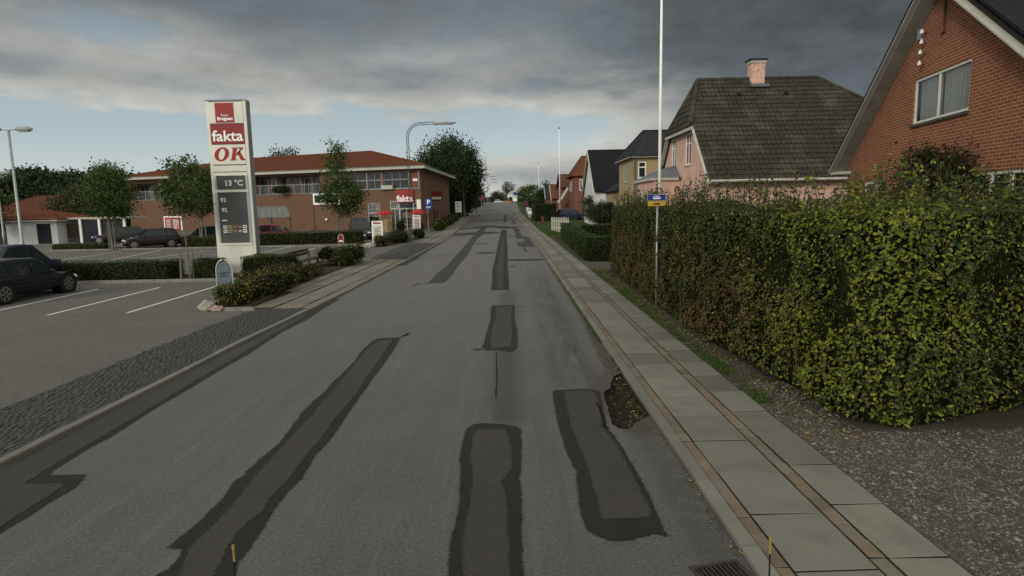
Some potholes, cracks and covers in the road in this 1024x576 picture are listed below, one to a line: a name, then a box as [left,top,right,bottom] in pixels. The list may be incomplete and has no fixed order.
pothole [604,374,649,429]
drain grate [688,559,753,576]
